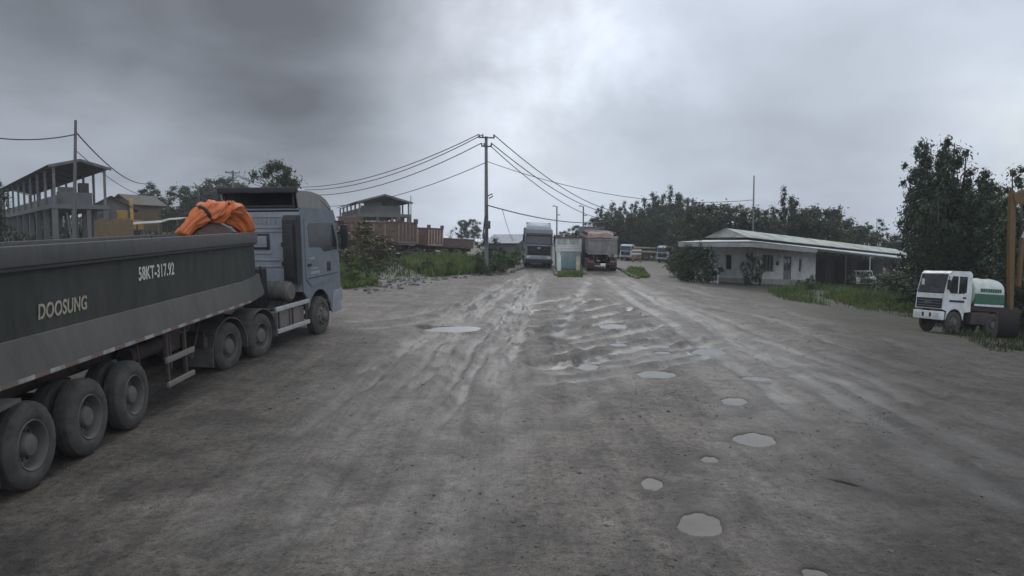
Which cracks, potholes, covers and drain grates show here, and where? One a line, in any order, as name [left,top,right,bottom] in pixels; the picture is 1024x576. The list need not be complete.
pothole [567,360,606,372]
pothole [712,396,757,407]
pothole [628,368,684,379]
pothole [661,507,739,544]
pothole [413,324,486,336]
pothole [627,473,677,496]
pothole [595,323,629,331]
pothole [731,375,780,384]
pothole [721,430,788,450]
pothole [688,452,731,466]
pothole [685,348,733,358]
